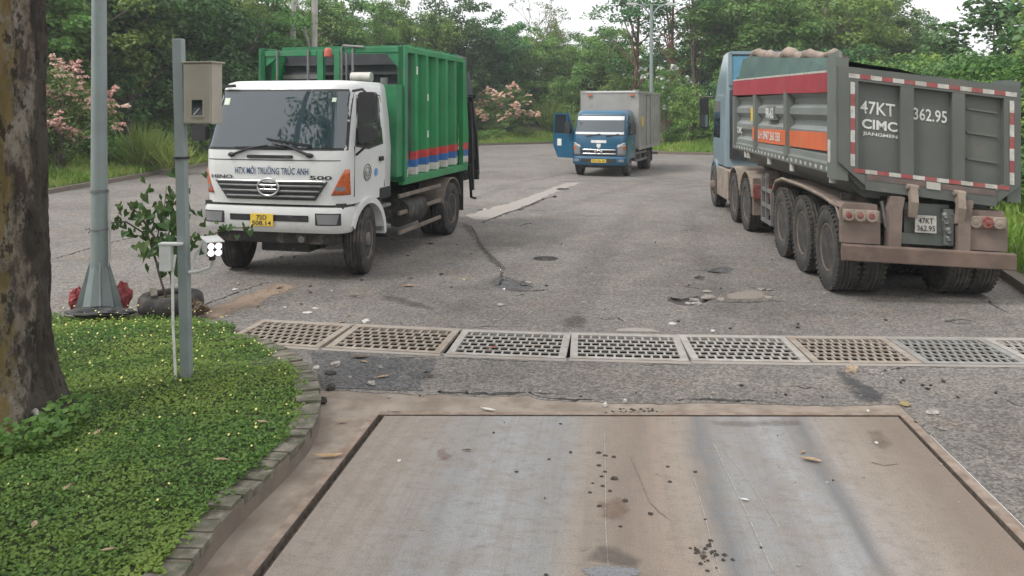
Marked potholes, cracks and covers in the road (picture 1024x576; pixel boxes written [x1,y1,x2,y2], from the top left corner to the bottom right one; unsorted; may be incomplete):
crack [471,180,592,296]
drain grate [570,333,689,362]
drain grate [231,320,352,348]
pothole [709,266,734,274]
pothole [493,278,534,290]
drain grate [786,336,924,364]
drain grate [325,325,460,354]
crack [439,390,594,402]
drain grate [984,338,1024,359]
drain grate [678,335,811,363]
pothole [667,296,709,306]
drain grate [446,330,571,359]
